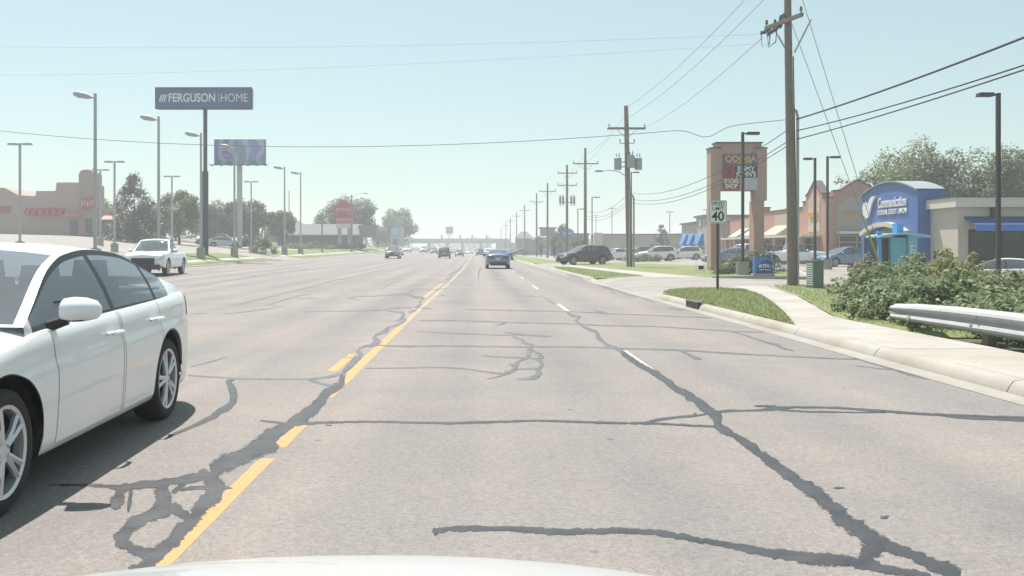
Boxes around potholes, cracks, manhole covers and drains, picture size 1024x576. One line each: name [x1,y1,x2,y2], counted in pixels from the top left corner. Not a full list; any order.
drain grate [685,300,705,309]
